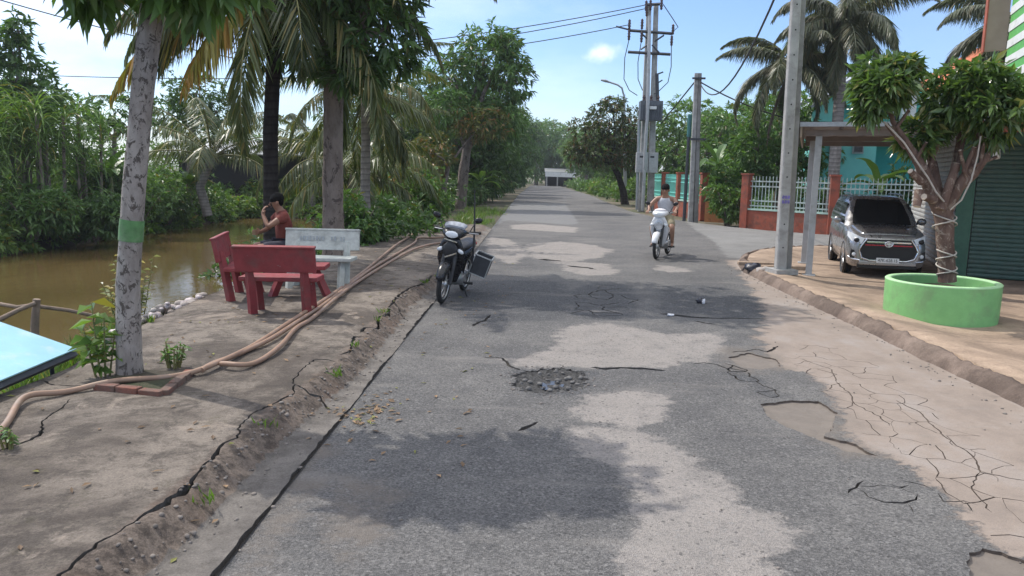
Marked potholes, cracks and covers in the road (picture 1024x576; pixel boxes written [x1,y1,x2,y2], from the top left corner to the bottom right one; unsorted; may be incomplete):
pothole [760,400,877,456]
crack [695,346,779,398]
crack [791,345,1024,538]
crack [571,286,638,316]
pothole [511,367,590,394]
